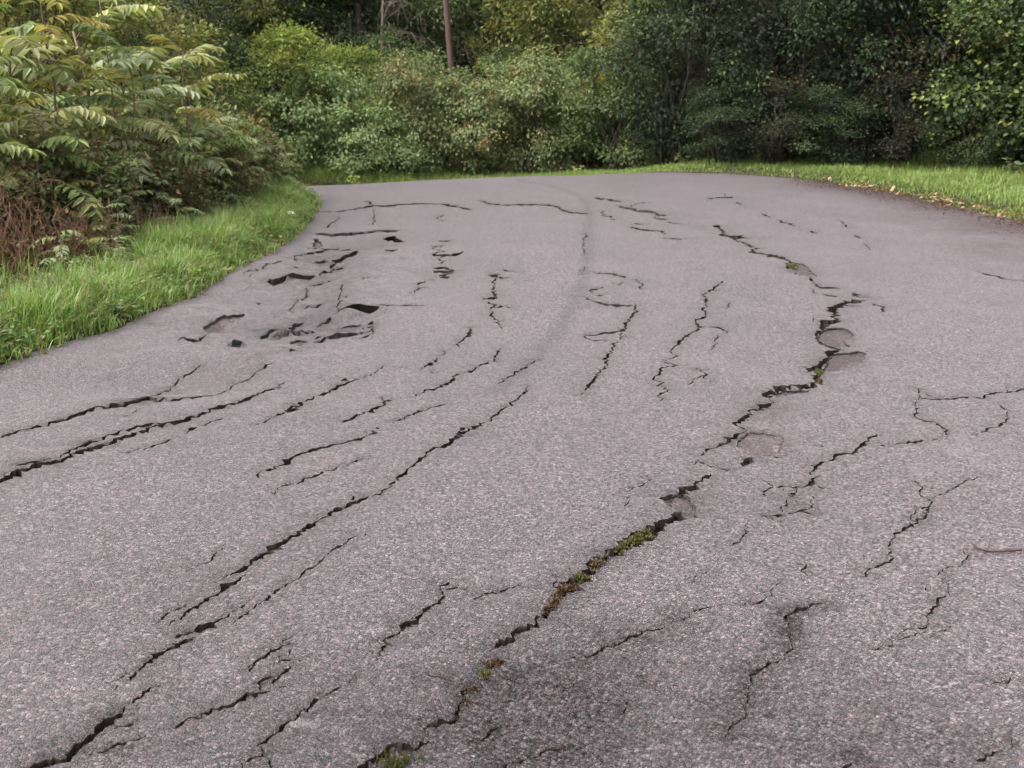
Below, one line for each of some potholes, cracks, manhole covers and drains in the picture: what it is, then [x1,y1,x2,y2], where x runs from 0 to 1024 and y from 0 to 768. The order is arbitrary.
pothole [822,351,866,373]
crack [243,197,682,352]
pothole [737,432,785,456]
pothole [203,314,245,333]
pothole [336,304,379,315]
pothole [818,328,854,348]
crack [0,270,535,768]
crack [357,194,886,768]
